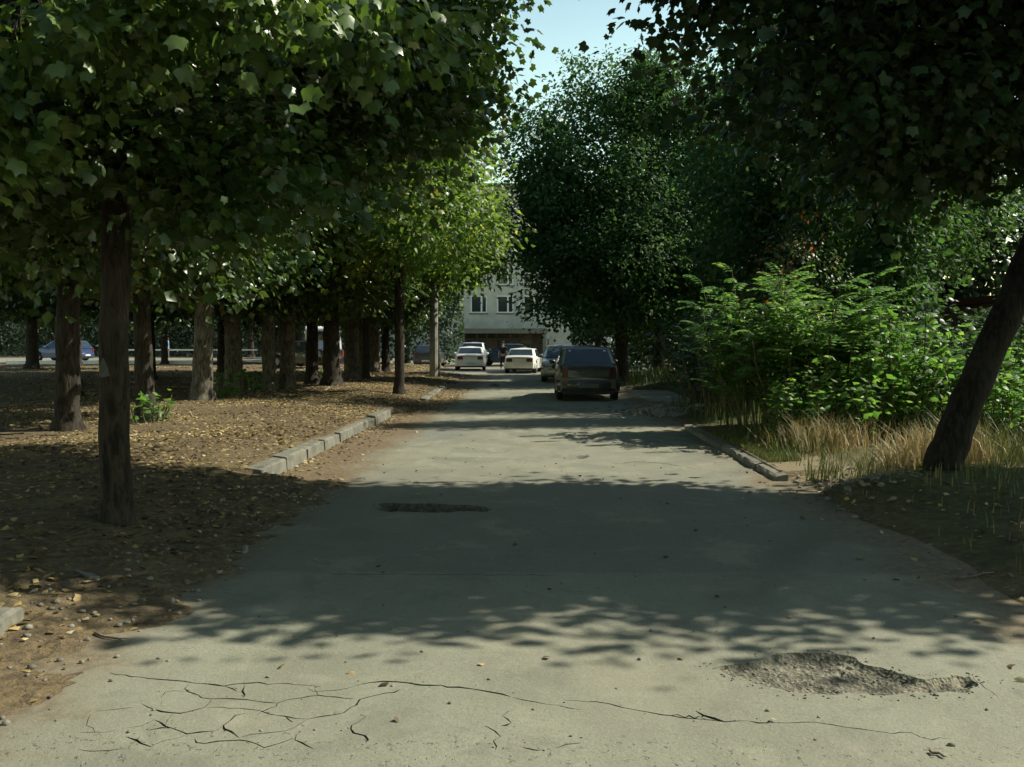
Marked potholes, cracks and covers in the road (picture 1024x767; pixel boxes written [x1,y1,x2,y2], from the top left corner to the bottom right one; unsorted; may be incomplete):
crack [78,673,949,754]
pothole [694,648,1014,701]
pothole [372,503,492,513]
